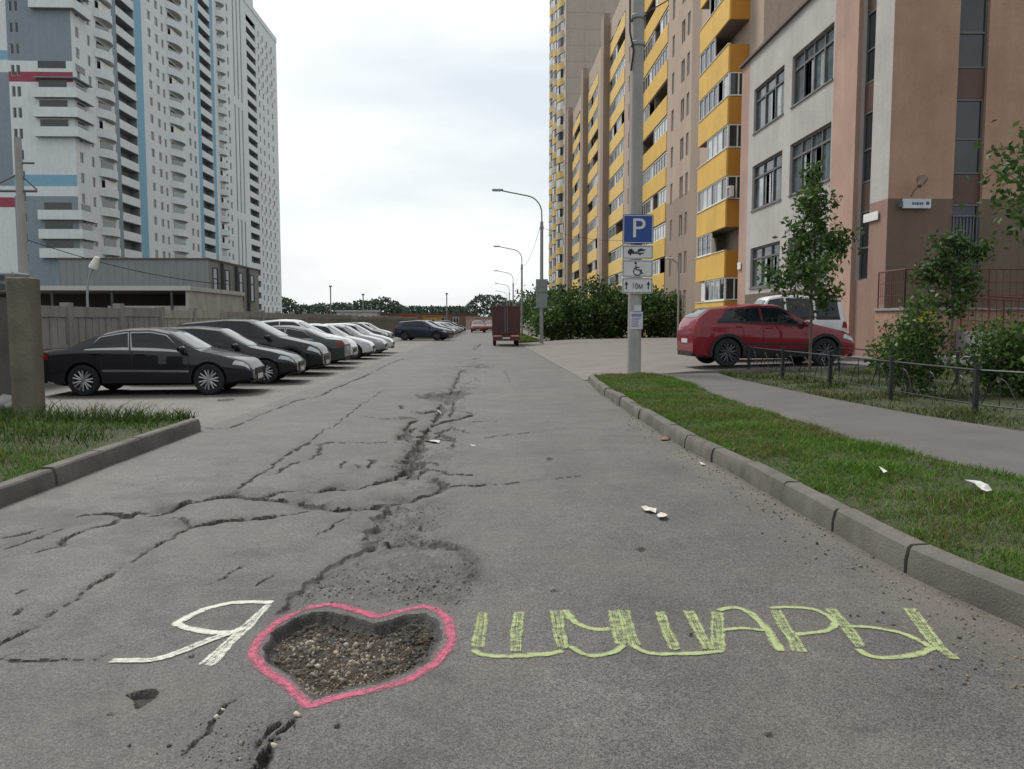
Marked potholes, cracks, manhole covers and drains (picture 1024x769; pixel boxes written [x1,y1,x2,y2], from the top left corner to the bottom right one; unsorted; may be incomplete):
pothole [261,611,444,700]
crack [248,718,297,769]
pothole [126,689,160,709]
crack [0,344,581,663]
pothole [273,541,476,616]
crack [181,695,242,756]
